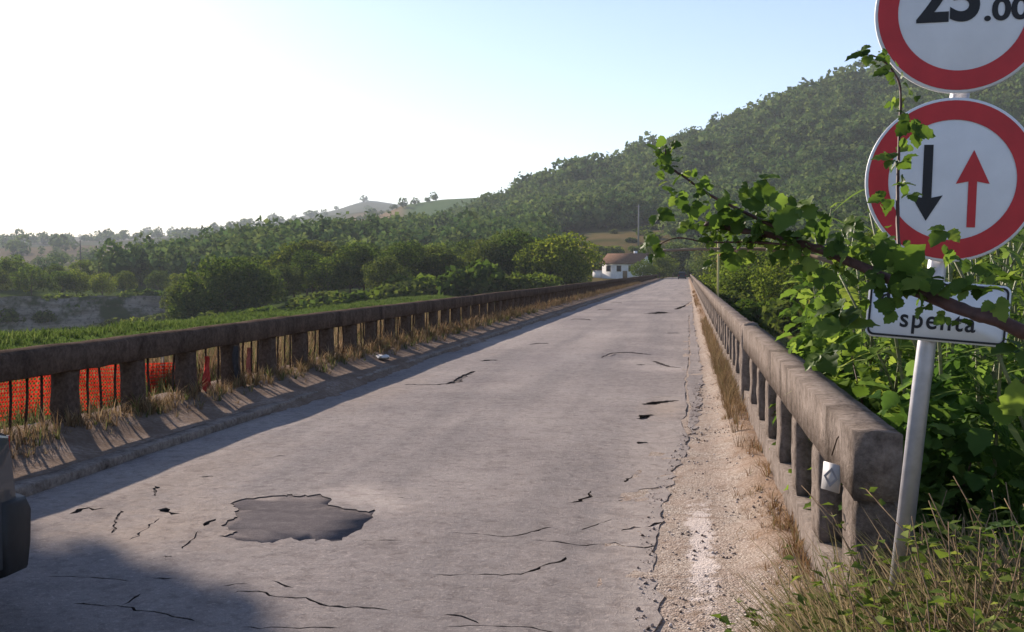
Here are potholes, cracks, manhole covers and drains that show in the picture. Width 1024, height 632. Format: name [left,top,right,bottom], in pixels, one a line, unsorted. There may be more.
crack [442,614,552,632]
crack [405,371,476,385]
crack [225,580,387,610]
crack [570,491,593,503]
crack [47,576,194,621]
pothole [221,494,375,543]
crack [111,511,157,539]
crack [439,520,662,576]
